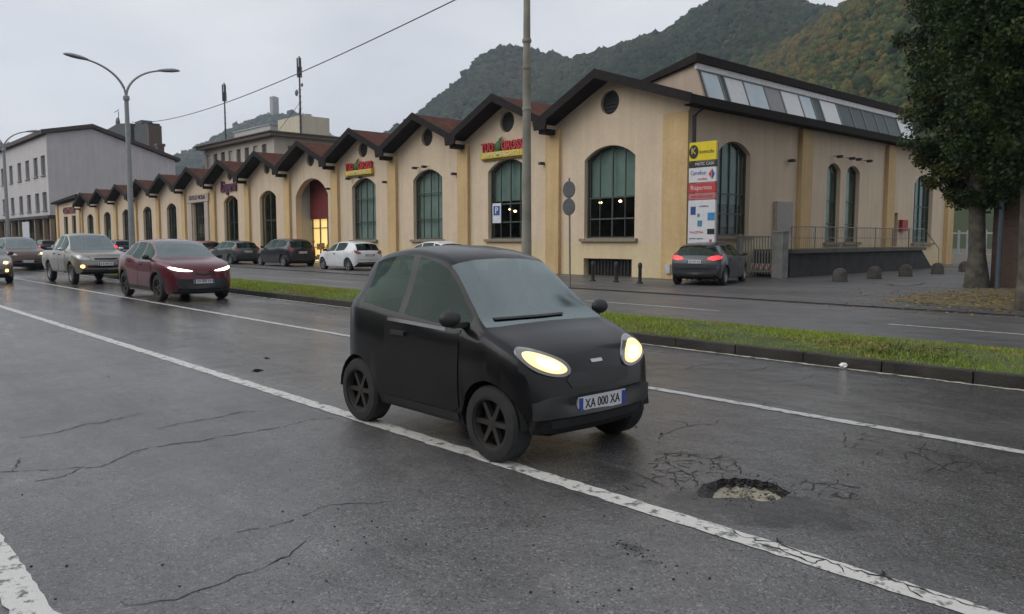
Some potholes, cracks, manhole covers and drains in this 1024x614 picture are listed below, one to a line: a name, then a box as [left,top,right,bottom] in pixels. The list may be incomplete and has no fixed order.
crack [842,432,1014,482]
crack [623,419,861,500]
crack [121,501,389,606]
crack [3,410,328,481]
pothole [697,478,790,502]
